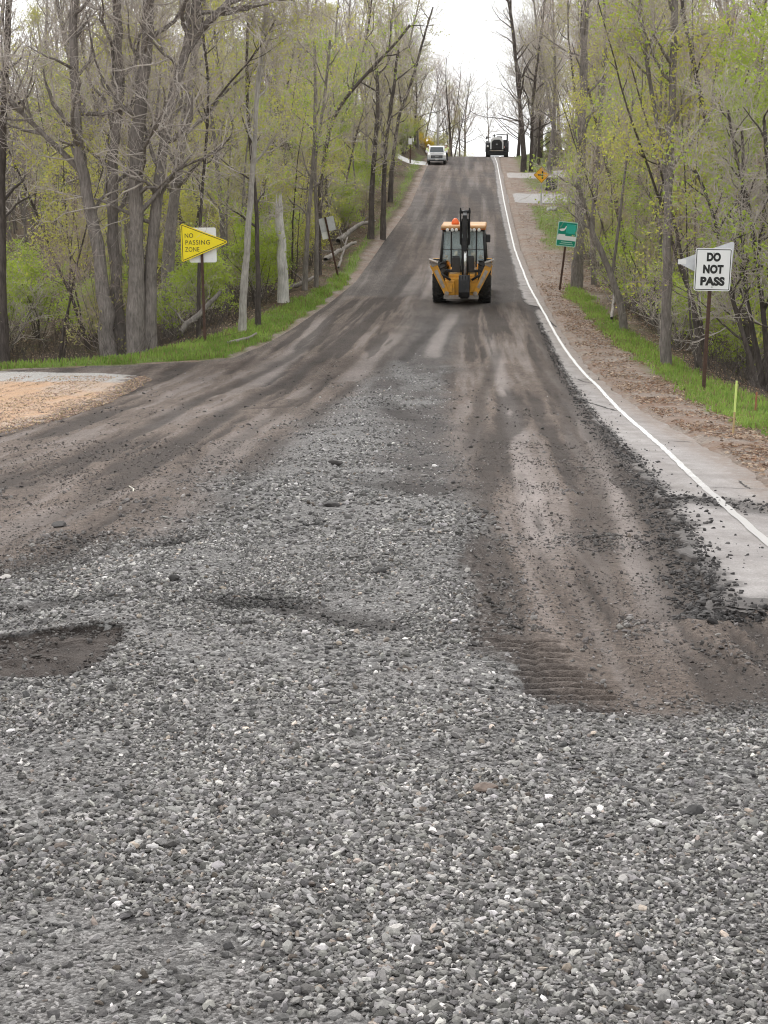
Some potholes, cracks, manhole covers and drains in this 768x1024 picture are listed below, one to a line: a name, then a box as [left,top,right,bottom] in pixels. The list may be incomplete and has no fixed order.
pothole [0,621,128,680]
